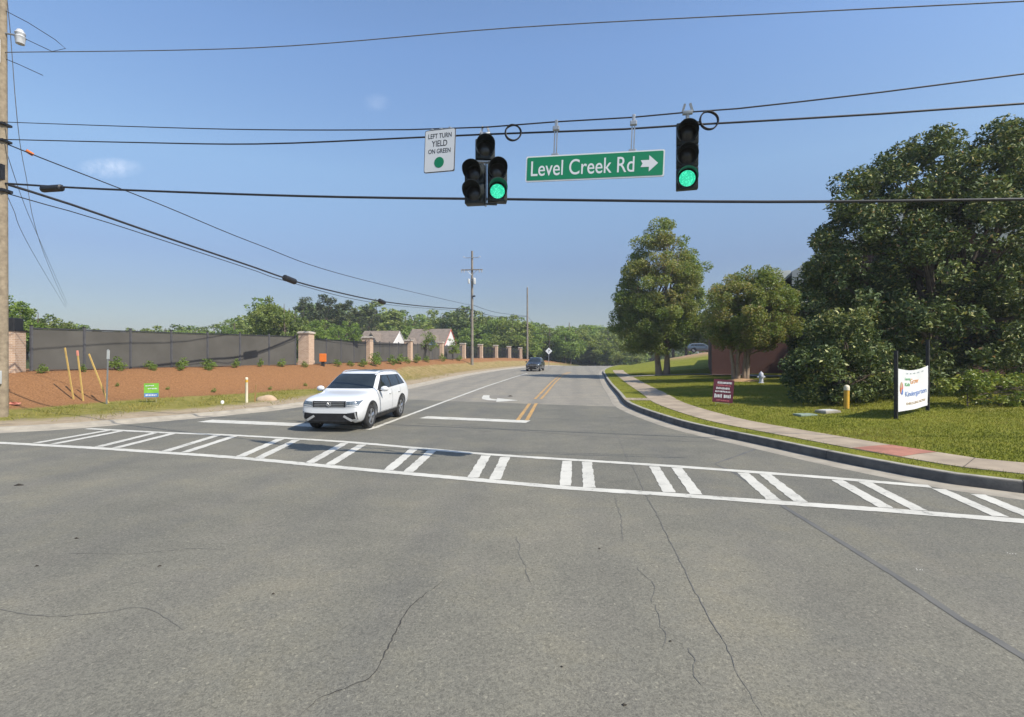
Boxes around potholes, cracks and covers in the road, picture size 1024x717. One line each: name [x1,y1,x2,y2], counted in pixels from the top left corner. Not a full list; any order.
crack [301,578,445,714]
crack [1,597,182,629]
